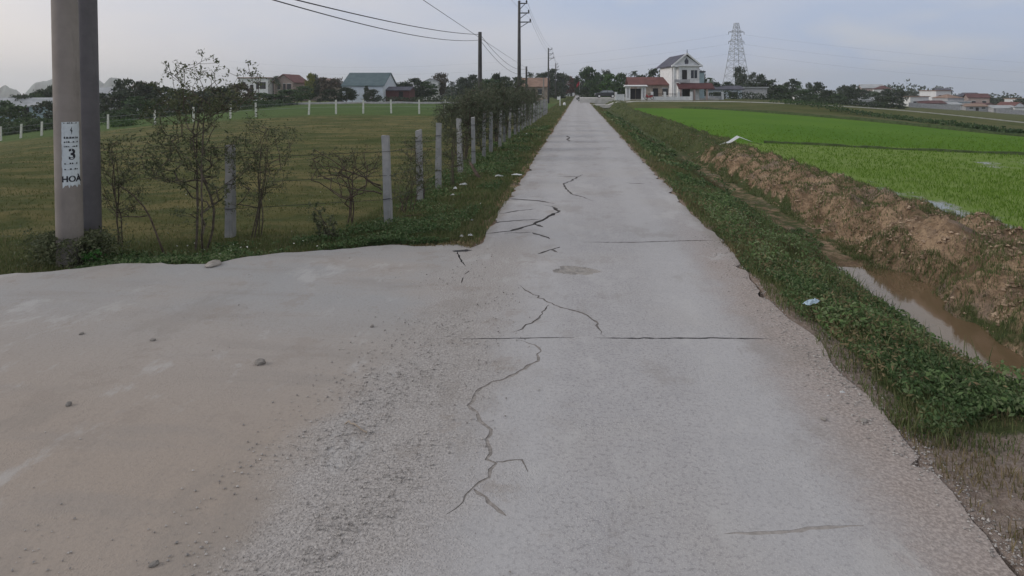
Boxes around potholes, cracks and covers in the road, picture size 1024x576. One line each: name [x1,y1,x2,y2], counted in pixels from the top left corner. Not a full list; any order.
crack [449,285,602,516]
crack [494,174,590,254]
